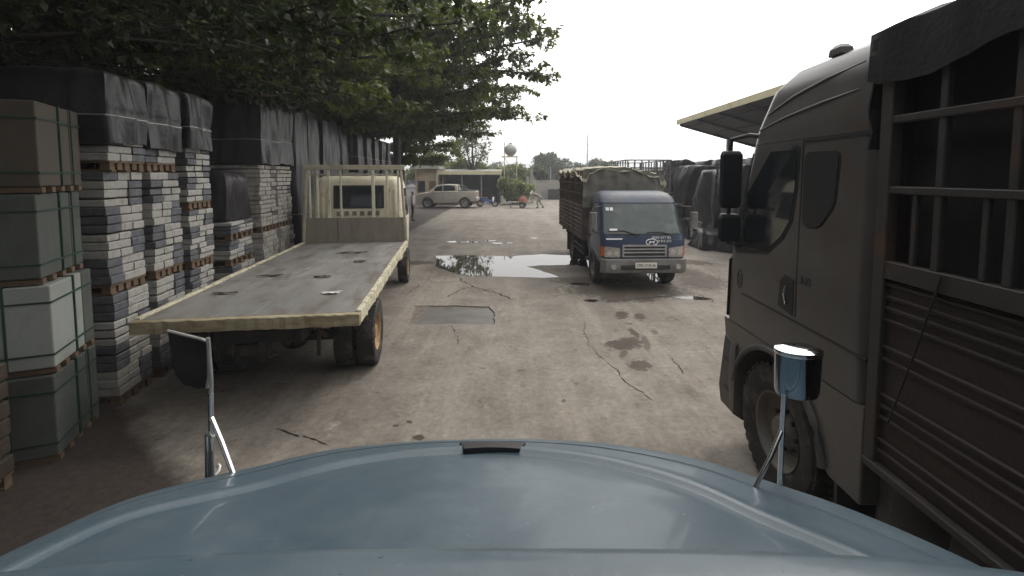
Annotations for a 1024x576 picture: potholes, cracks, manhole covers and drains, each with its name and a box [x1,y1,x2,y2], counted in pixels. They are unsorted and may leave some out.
crack [583,323,653,401]
crack [406,276,510,299]
